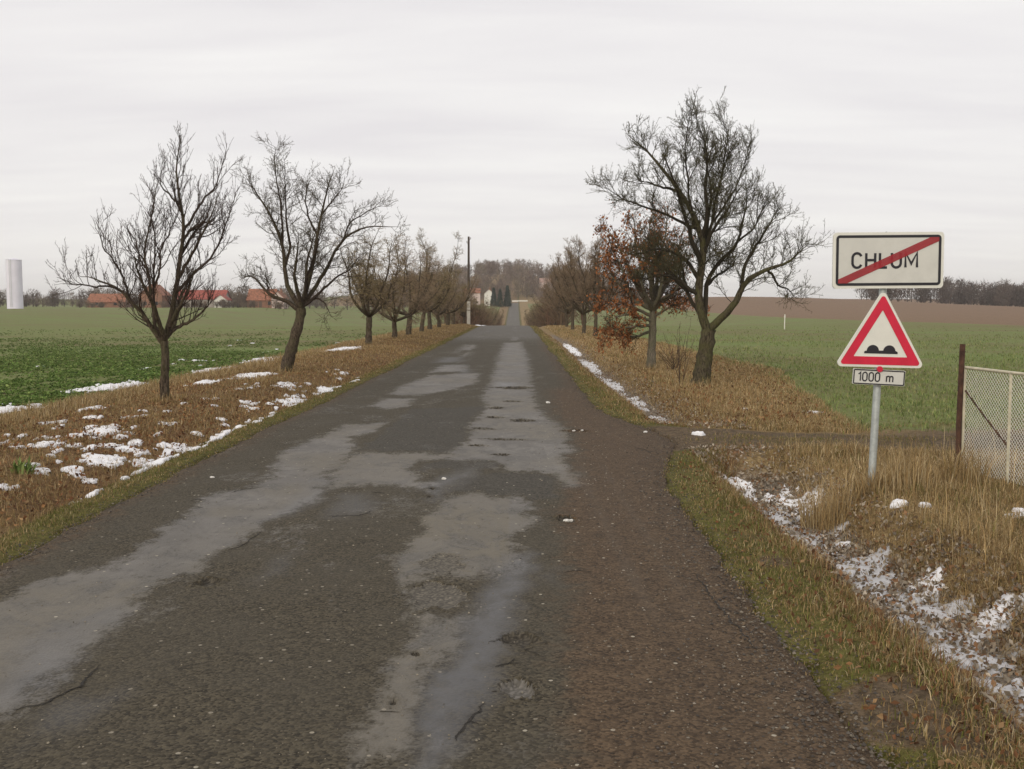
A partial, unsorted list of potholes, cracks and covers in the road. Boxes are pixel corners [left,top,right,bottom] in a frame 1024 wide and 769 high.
pothole [185,575,231,589]
crack [455,702,485,740]
pothole [400,578,481,614]
pothole [489,628,550,652]
pothole [491,674,544,704]
crack [15,665,99,710]
